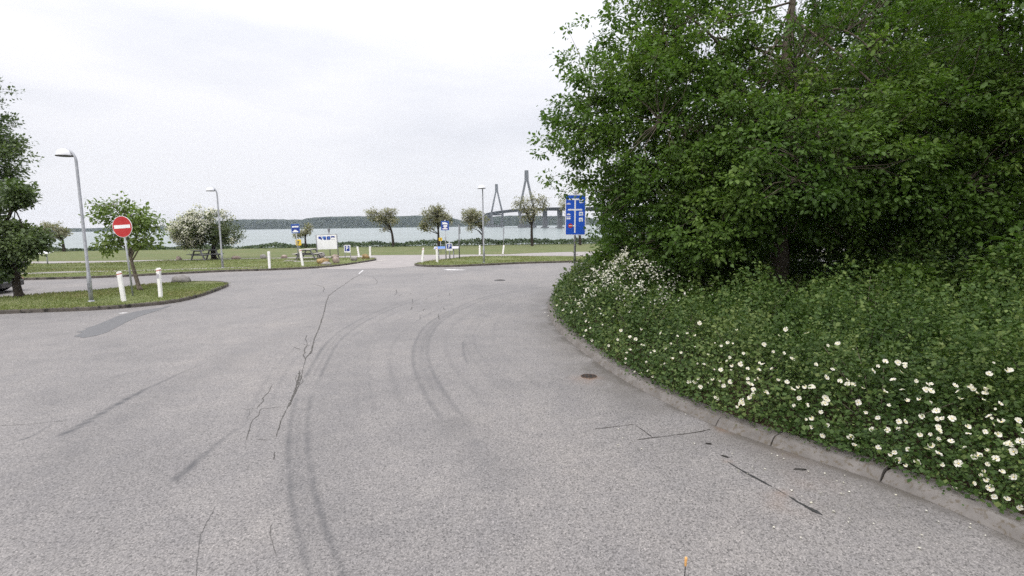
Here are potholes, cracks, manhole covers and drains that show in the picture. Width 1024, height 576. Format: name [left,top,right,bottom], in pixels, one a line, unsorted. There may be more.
crack [596,424,710,440]
crack [246,274,361,460]
